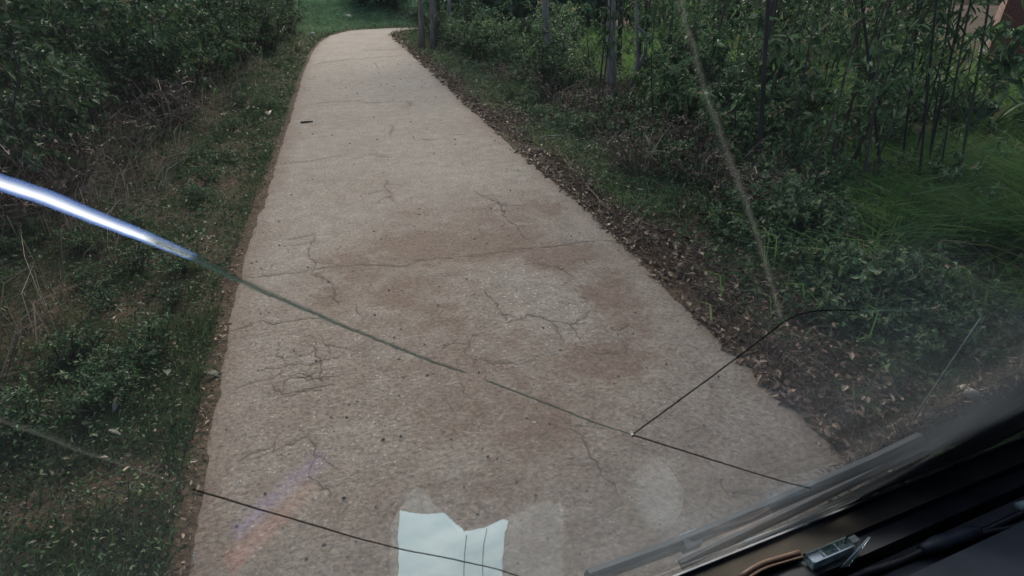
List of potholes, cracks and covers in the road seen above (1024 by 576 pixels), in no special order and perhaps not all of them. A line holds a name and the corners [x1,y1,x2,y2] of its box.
crack [288,235,360,315]
crack [476,192,531,240]
crack [569,421,624,527]
crack [446,291,591,410]
crack [241,335,361,411]
crack [248,436,344,524]
